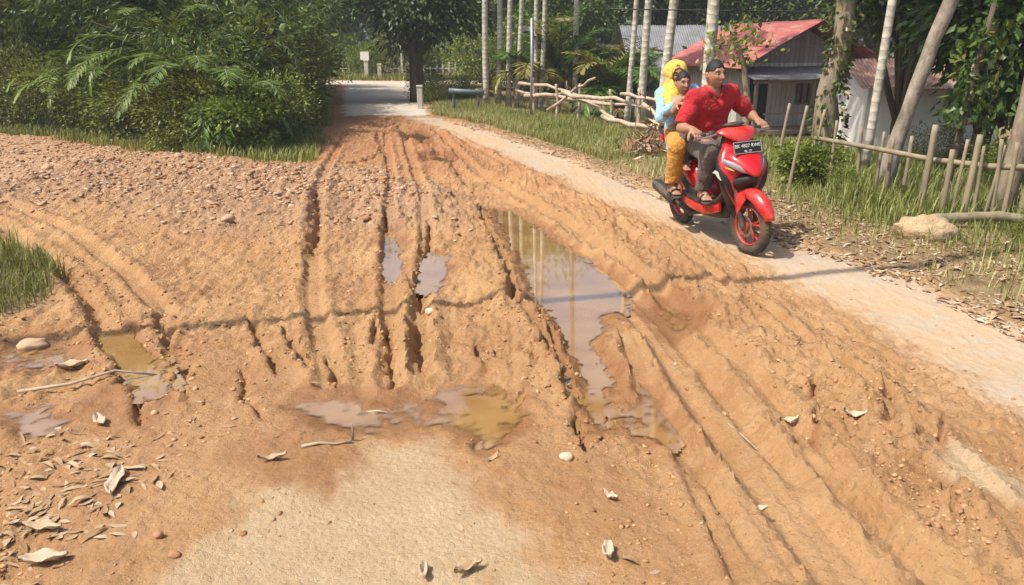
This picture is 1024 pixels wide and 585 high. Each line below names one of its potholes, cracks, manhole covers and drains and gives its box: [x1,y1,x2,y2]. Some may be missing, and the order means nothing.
pothole [0,403,72,438]
pothole [424,384,530,450]
pothole [642,287,711,346]
pothole [414,253,452,296]
pothole [96,324,188,404]
pothole [382,223,407,285]
pothole [602,381,689,453]
pothole [486,206,635,437]
